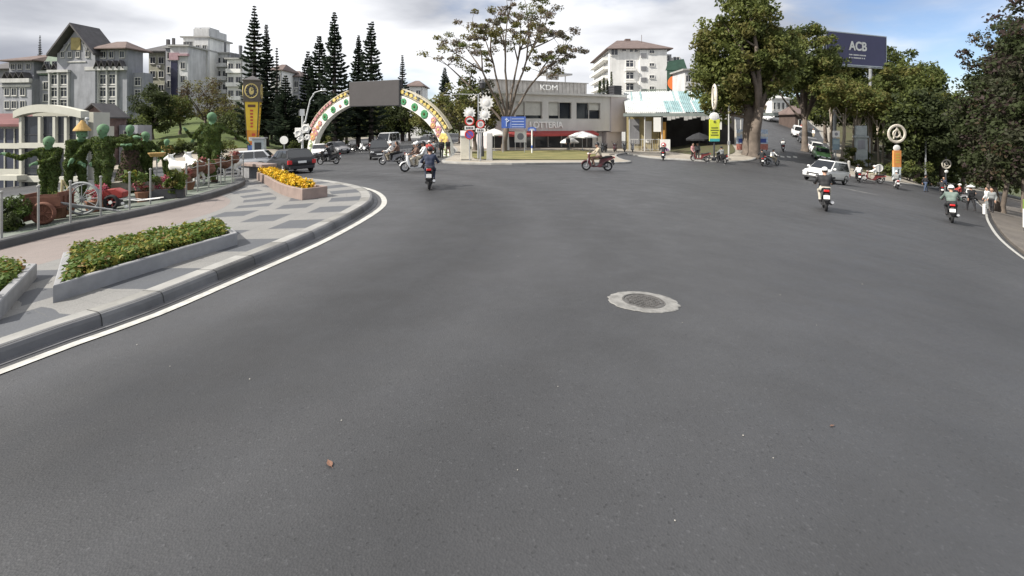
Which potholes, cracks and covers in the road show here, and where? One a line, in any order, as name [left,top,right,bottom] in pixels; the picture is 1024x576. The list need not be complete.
manhole cover [608,291,681,313]
